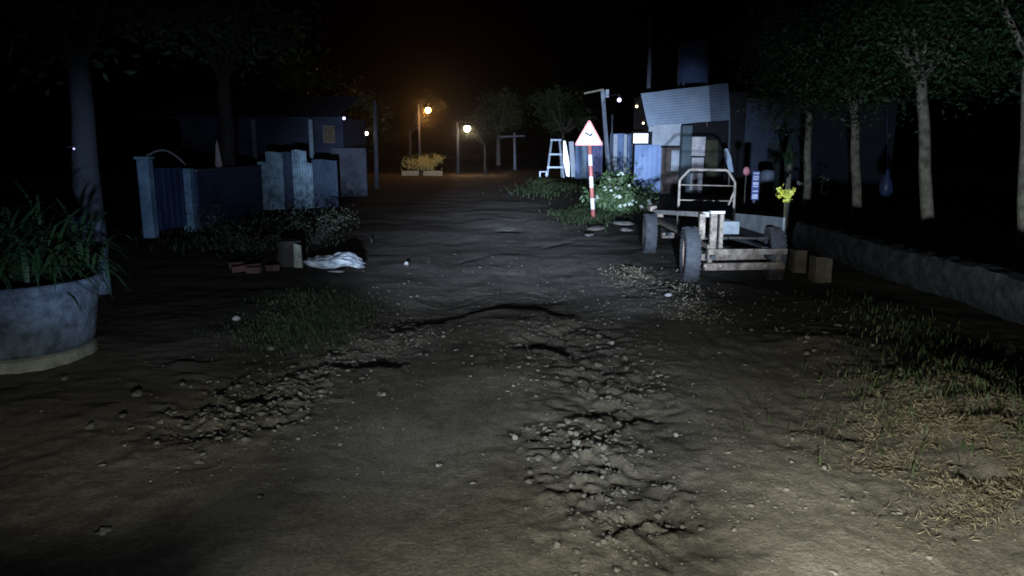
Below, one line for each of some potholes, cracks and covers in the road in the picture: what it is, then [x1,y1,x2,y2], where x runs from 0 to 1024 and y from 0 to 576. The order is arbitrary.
pothole [585,394,697,436]
